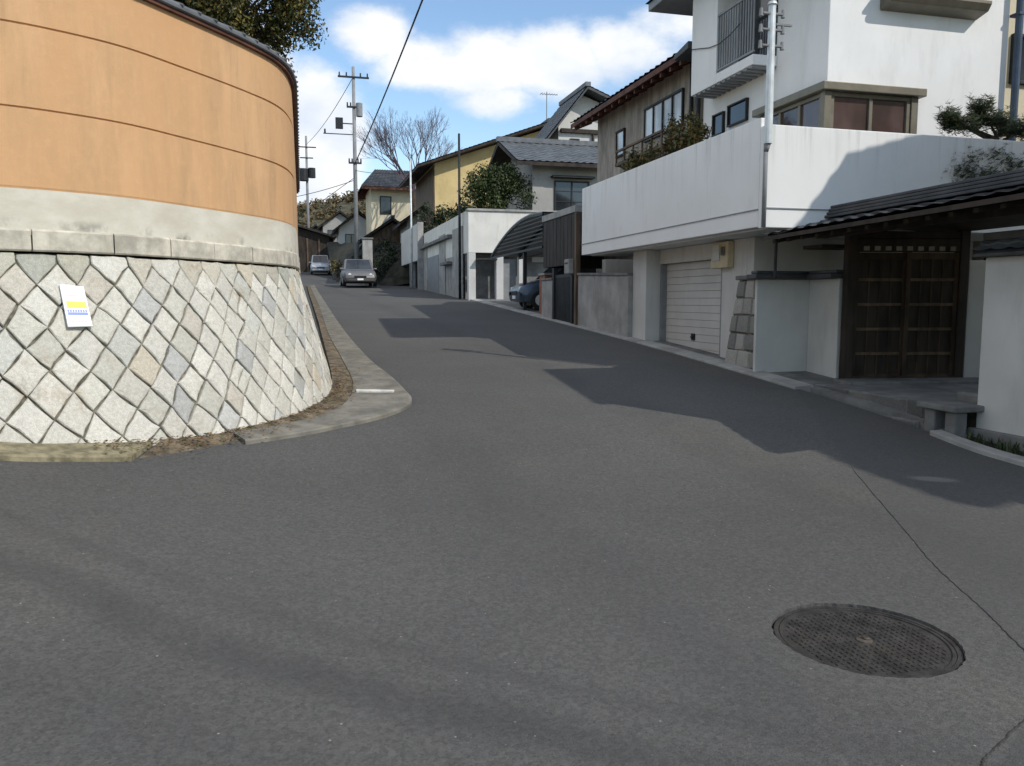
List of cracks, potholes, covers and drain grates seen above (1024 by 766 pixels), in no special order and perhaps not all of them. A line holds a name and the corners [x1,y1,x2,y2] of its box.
manhole cover [773,606,964,678]
crack [980,720,1024,766]
